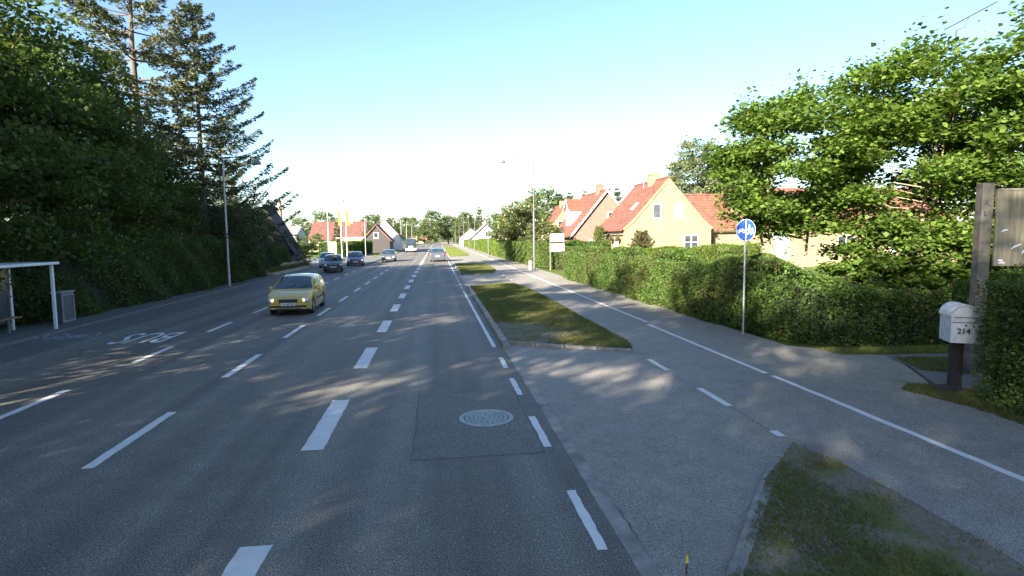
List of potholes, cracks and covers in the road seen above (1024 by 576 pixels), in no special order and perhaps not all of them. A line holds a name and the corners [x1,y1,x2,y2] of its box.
manhole cover [459,409,514,427]
